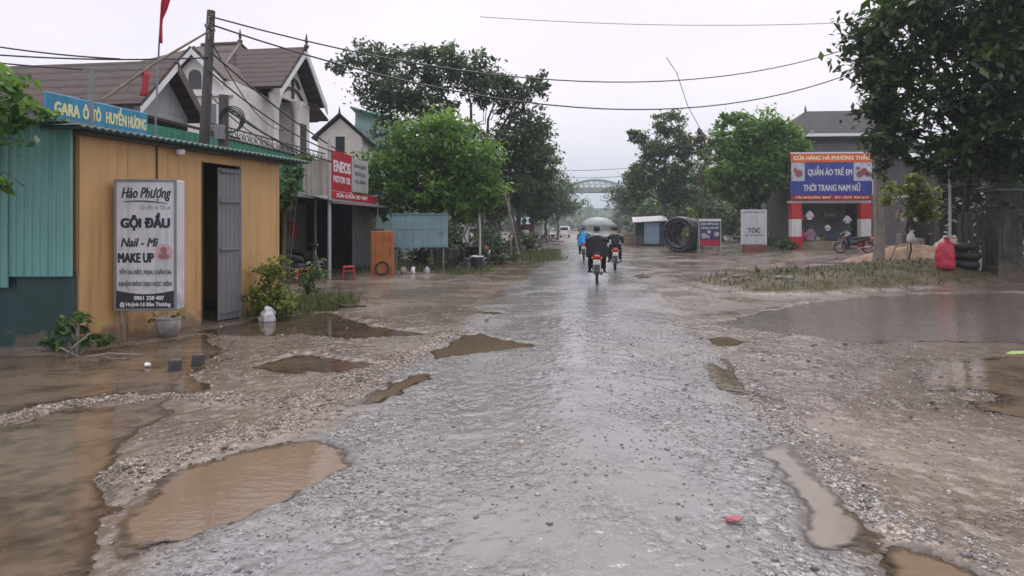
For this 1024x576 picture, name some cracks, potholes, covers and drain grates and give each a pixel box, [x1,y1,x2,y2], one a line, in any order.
pothole [111,435,363,554]
pothole [429,331,542,359]
pothole [359,370,441,405]
pothole [751,444,888,554]
pothole [702,334,749,346]
pothole [701,362,752,395]
pothole [865,539,993,576]
